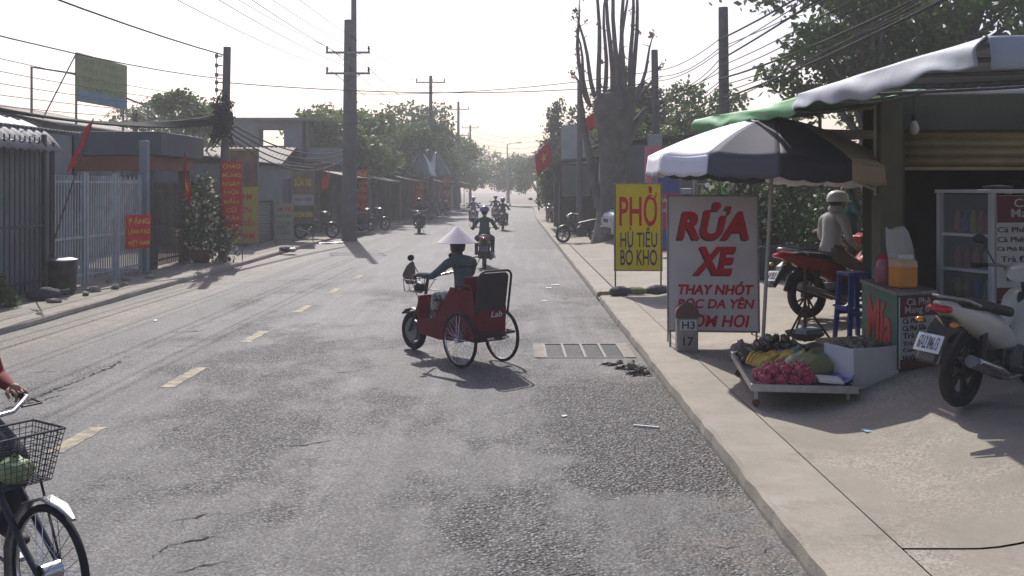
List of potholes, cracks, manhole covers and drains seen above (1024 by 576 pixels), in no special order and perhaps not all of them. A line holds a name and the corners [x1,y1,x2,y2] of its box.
crack [152,513,221,559]
drain grate [533,343,636,358]
crack [7,361,121,409]
